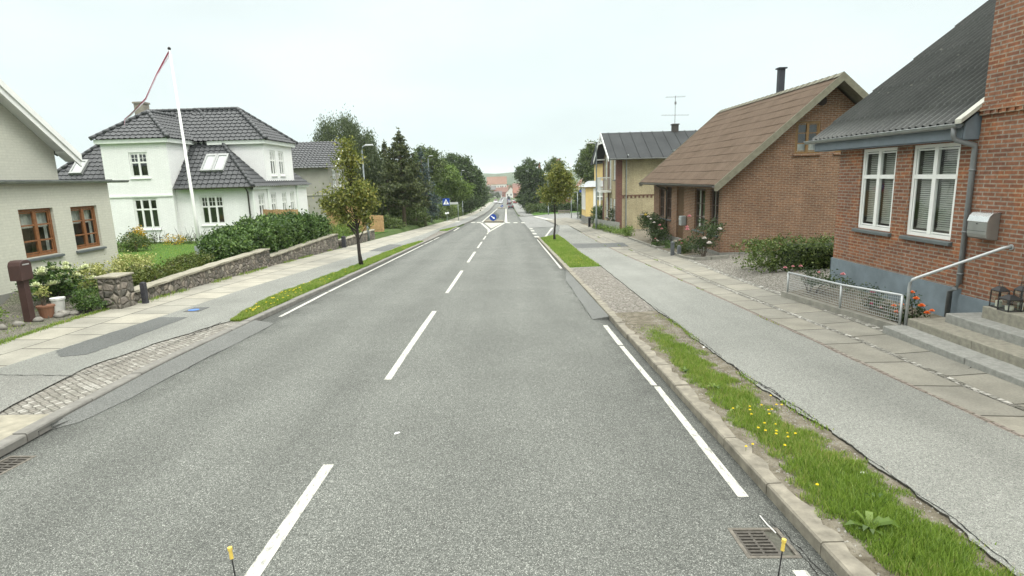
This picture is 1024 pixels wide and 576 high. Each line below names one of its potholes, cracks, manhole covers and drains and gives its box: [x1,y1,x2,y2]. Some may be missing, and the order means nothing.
drain grate [0,456,36,475]
drain grate [727,528,802,559]
